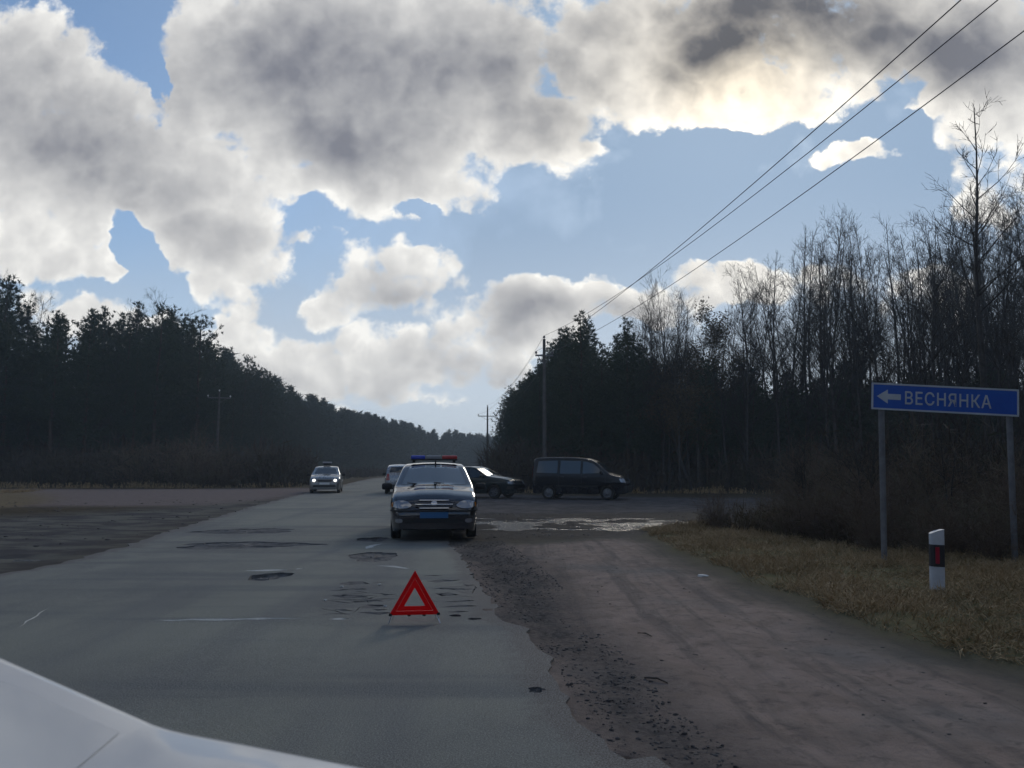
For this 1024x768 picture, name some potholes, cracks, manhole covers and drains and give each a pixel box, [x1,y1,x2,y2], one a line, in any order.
pothole [348,552,398,562]
pothole [176,541,326,550]
pothole [248,572,294,581]
